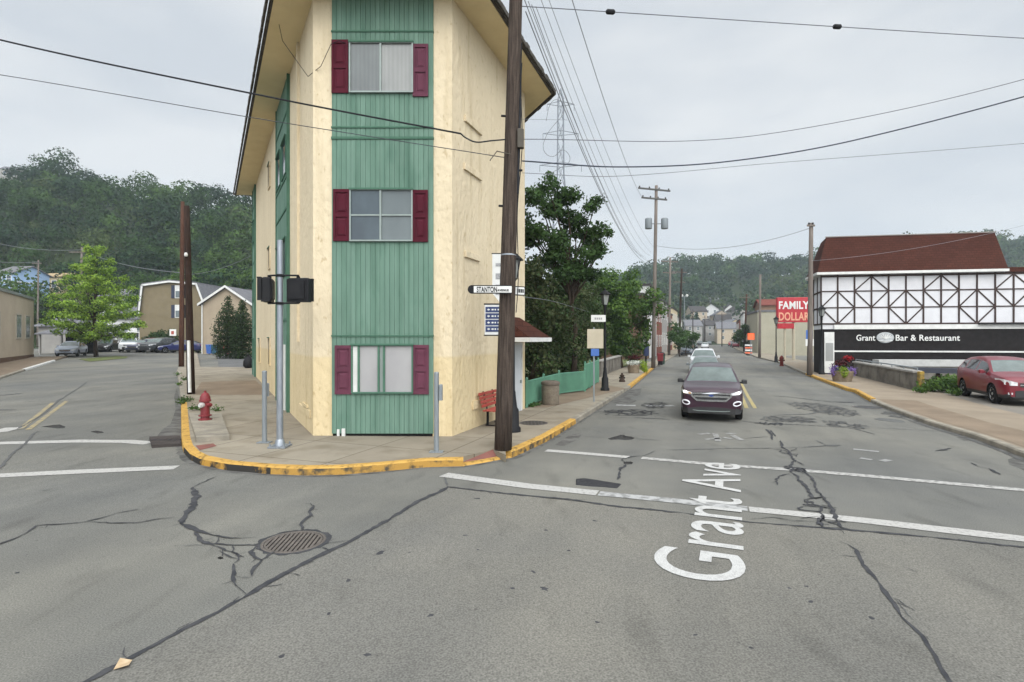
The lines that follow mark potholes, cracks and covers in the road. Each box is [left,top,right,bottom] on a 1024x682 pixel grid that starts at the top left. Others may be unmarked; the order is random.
crack [617,402,952,682]
drain grate [148,436,181,448]
crack [0,477,275,594]
